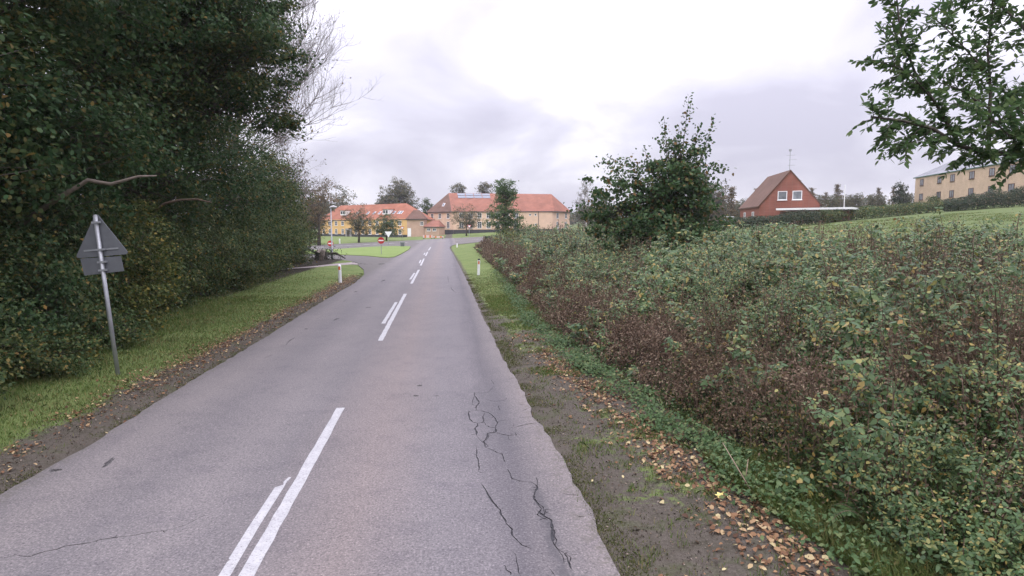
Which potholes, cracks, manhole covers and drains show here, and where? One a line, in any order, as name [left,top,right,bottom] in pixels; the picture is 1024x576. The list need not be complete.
crack [468,380,575,574]
